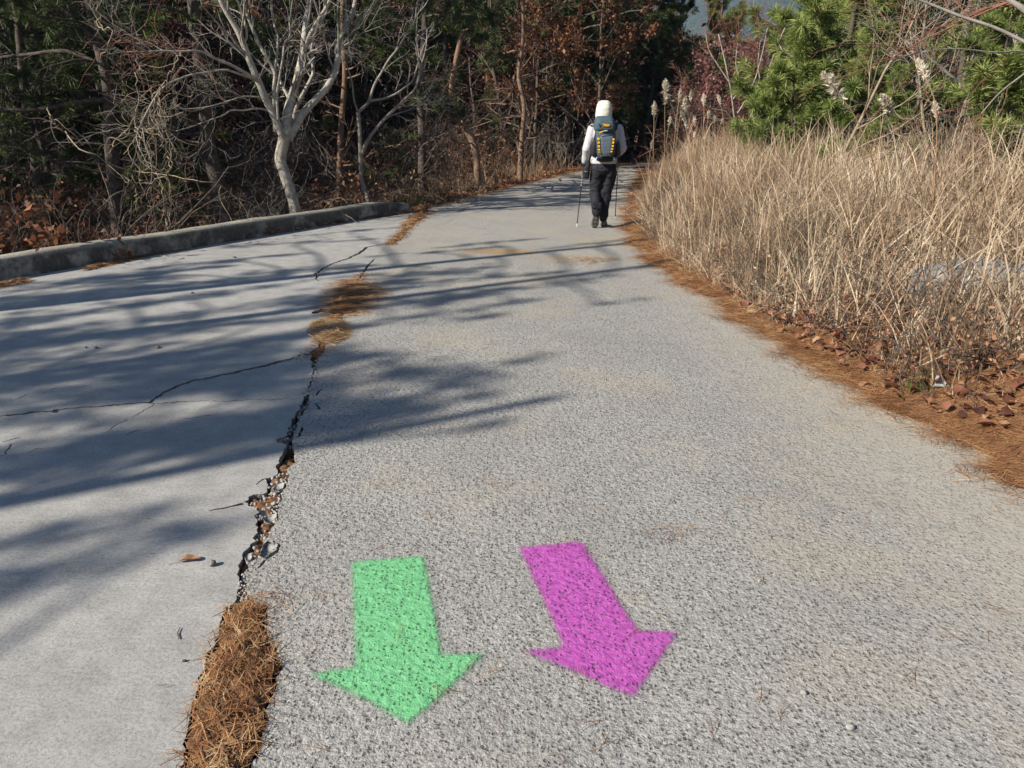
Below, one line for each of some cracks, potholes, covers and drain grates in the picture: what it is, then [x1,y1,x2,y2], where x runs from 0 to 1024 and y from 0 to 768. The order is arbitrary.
crack [0,353,309,435]
crack [314,244,383,284]
